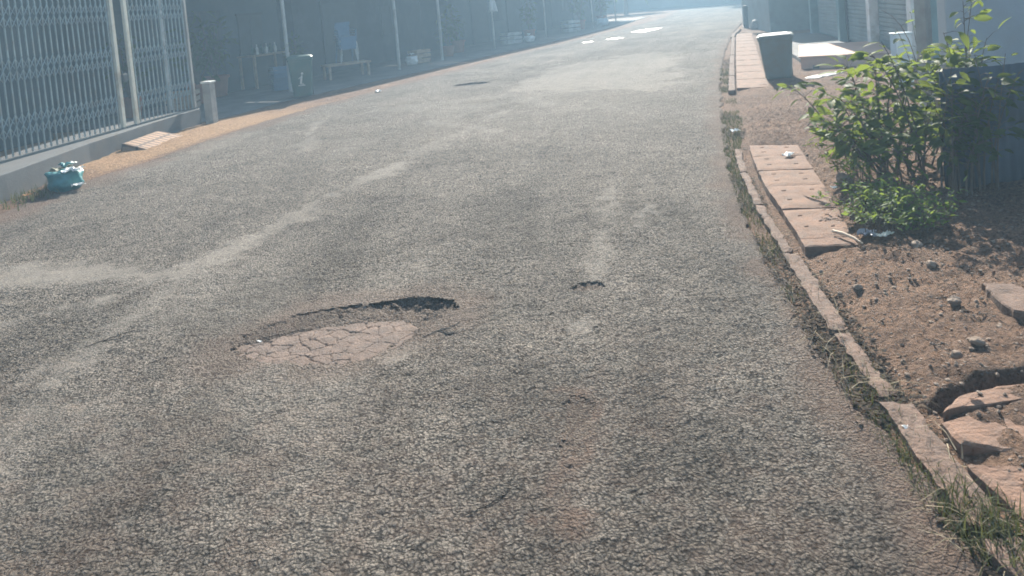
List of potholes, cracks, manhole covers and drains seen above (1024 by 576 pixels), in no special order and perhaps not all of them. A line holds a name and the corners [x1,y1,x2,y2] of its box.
pothole [212,293,472,375]
crack [423,322,459,337]
pothole [564,279,612,293]
crack [84,330,135,348]
